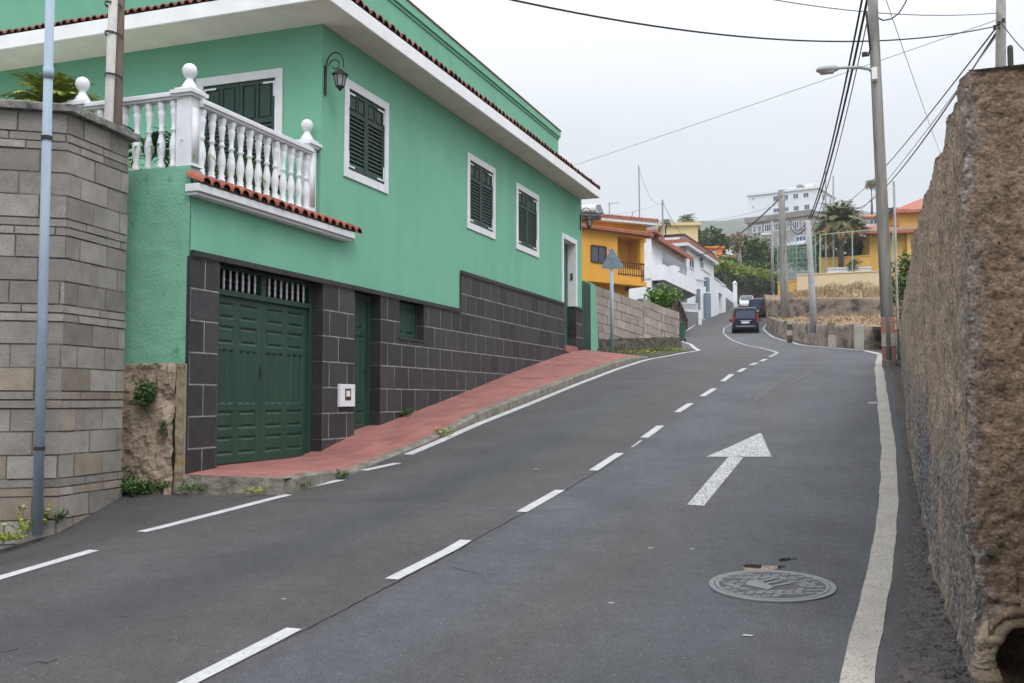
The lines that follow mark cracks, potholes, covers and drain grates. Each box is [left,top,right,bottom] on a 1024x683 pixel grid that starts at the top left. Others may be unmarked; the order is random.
manhole cover [709,570,837,603]
